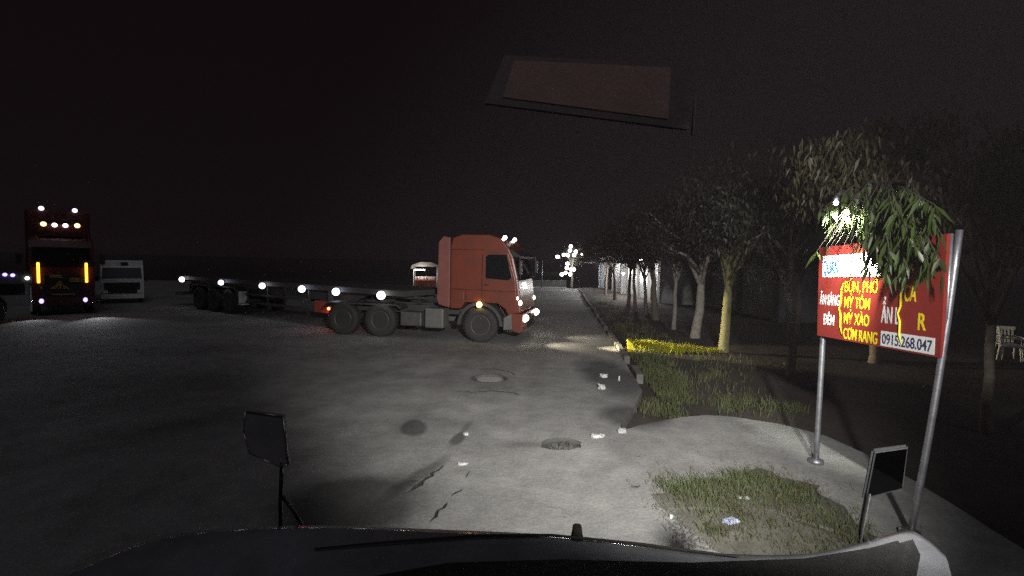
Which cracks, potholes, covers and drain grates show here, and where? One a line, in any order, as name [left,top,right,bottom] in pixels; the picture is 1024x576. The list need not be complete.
crack [398,466,470,521]
pothole [541,438,581,450]
manhole cover [471,374,508,383]
crack [458,368,519,395]
